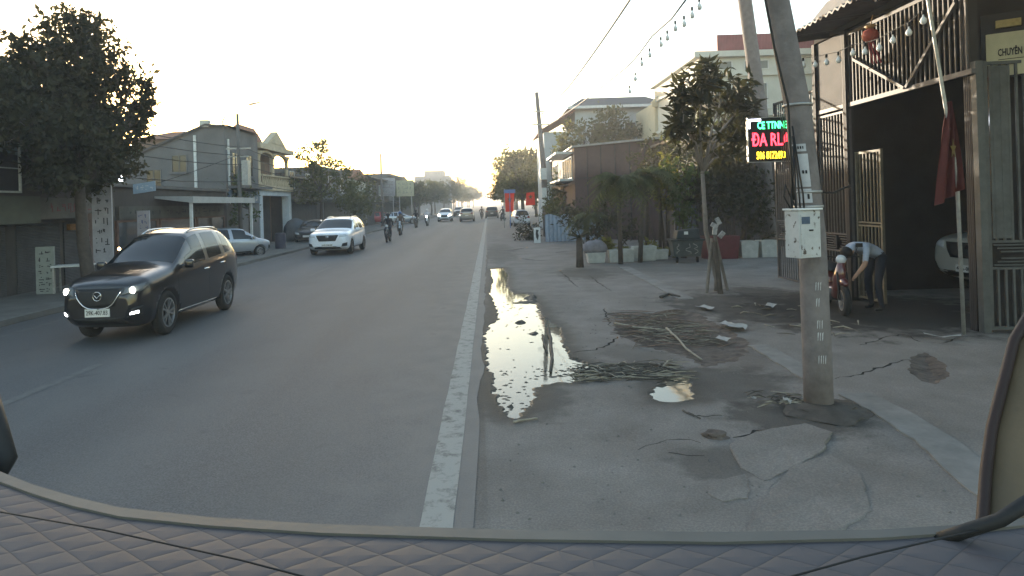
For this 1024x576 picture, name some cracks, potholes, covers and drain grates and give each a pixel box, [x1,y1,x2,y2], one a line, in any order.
pothole [482,267,625,419]
pothole [907,352,950,384]
crack [860,334,956,345]
crack [689,412,762,438]
crack [574,308,617,353]
